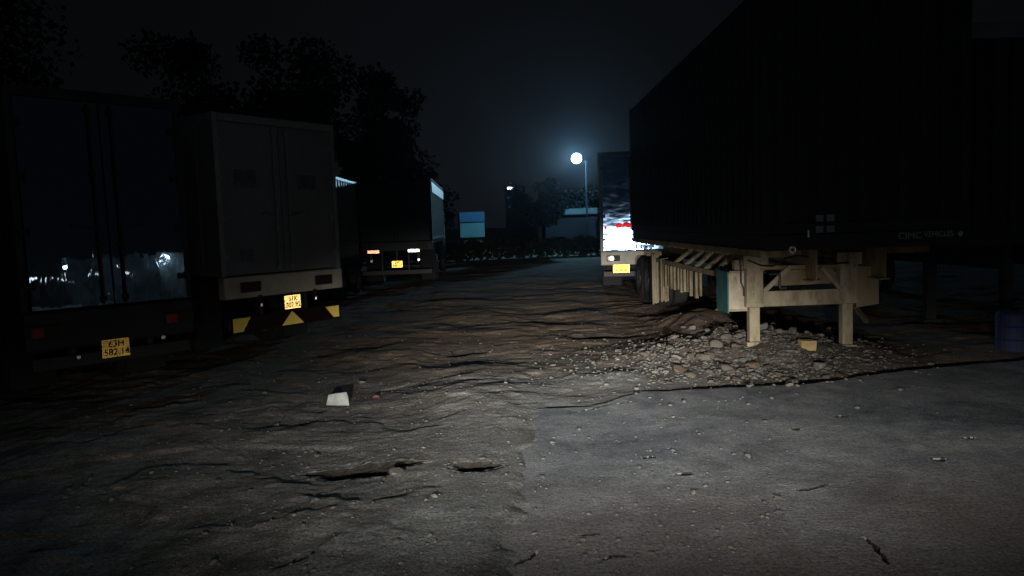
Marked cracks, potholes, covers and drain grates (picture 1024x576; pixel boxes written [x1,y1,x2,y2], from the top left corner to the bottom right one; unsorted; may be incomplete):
crack [782,481,867,497]
crack [562,399,648,416]
pothole [287,458,437,482]
pothole [448,460,508,473]
crack [848,532,904,566]
crack [513,529,638,572]
